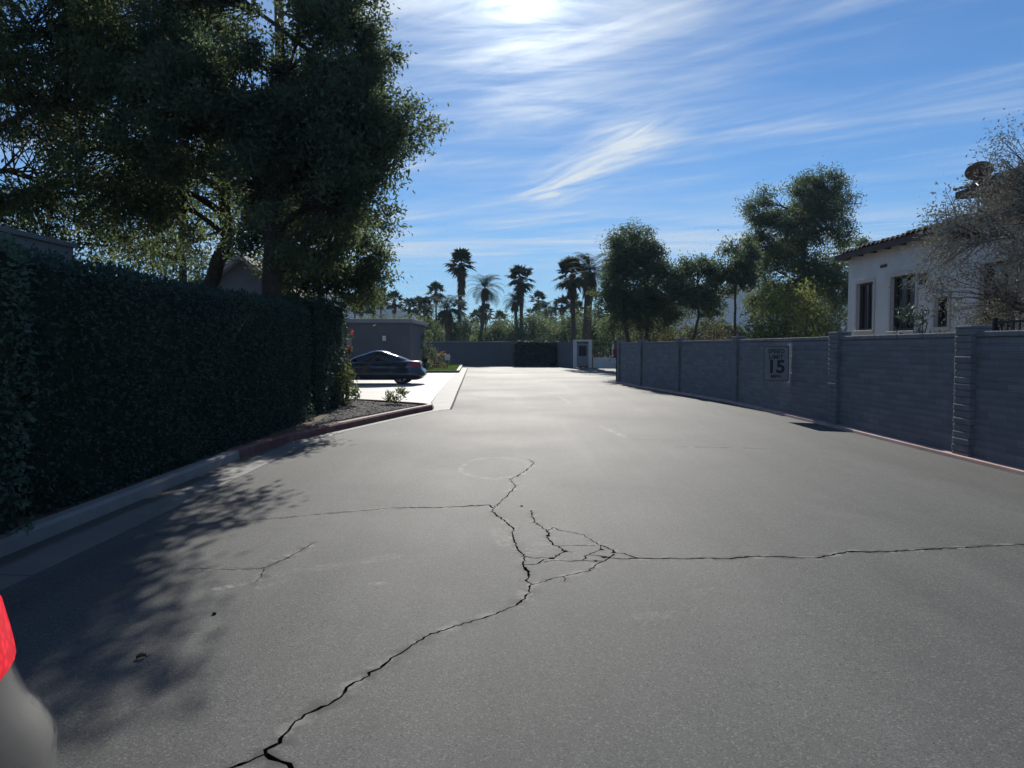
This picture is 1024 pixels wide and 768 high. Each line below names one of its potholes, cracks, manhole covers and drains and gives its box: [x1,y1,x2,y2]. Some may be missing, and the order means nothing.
crack [183,459,1024,768]
